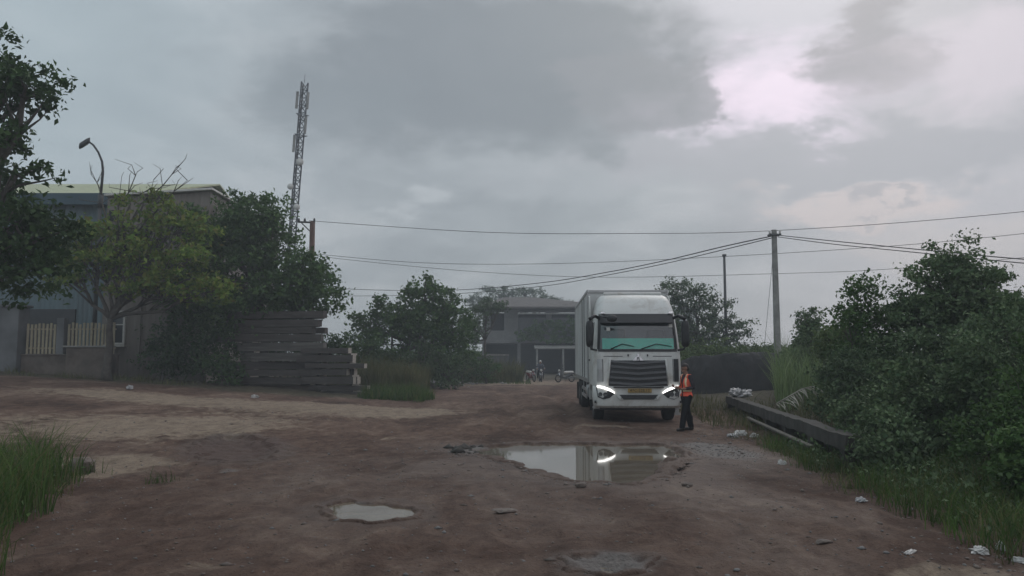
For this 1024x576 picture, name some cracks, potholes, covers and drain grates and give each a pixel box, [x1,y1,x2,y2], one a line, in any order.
pothole [313,498,424,524]
pothole [465,441,700,485]
pothole [555,550,661,576]
